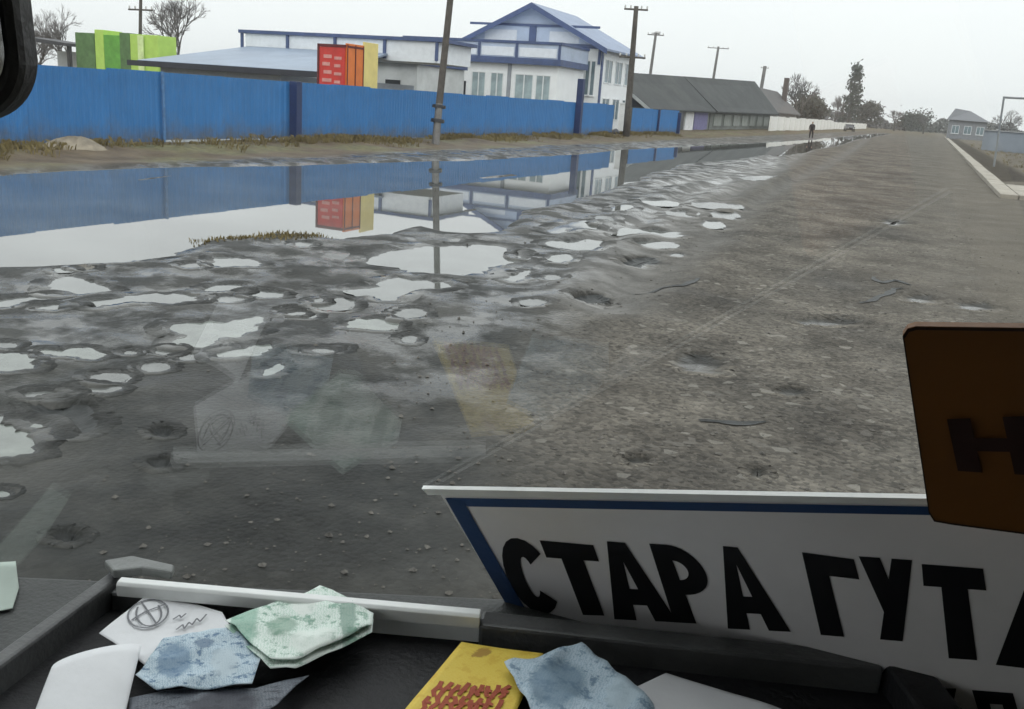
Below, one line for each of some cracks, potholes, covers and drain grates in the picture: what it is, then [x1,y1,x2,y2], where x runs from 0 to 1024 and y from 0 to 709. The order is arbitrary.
pothole [35,523,100,549]
pothole [509,296,560,309]
crack [633,278,700,295]
pothole [559,287,623,310]
pothole [135,421,188,440]
pothole [0,350,57,376]
pothole [132,452,188,474]
pothole [530,235,617,252]
pothole [343,238,552,281]
crack [860,276,911,303]
pothole [659,347,741,378]
pothole [27,272,131,298]
